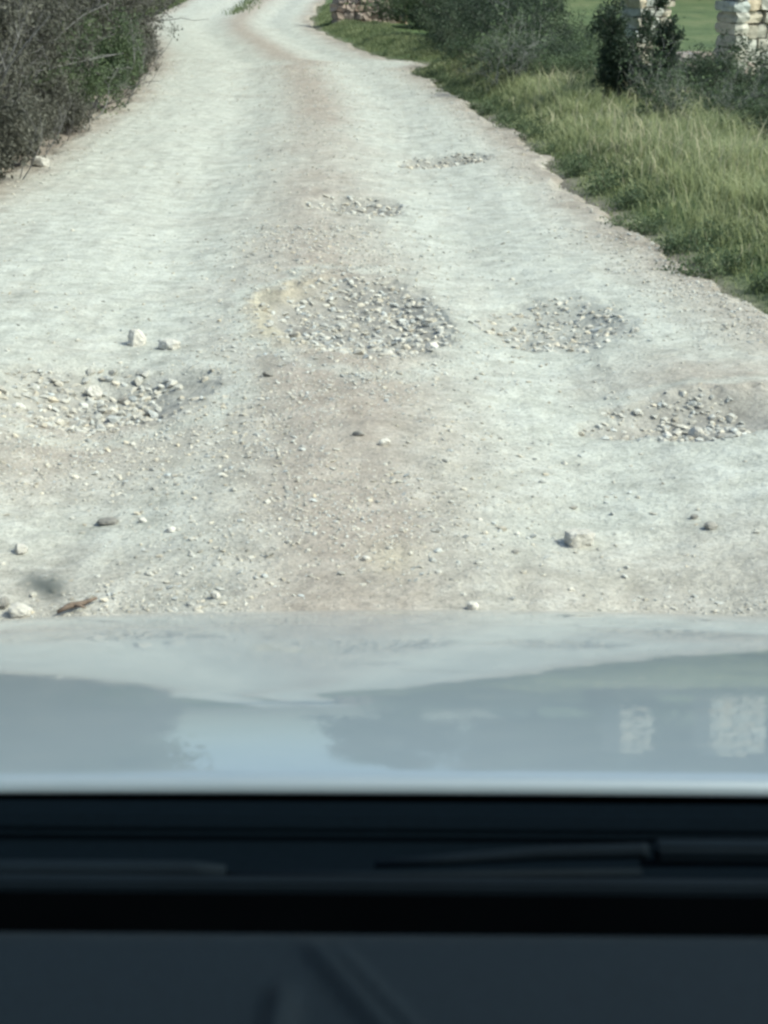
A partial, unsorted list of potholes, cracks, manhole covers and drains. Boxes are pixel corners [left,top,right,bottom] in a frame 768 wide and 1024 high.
pothole [467,296,641,357]
pothole [253,272,457,359]
pothole [301,194,408,217]
pothole [396,152,493,169]
pothole [573,384,768,443]
pothole [0,363,223,433]
